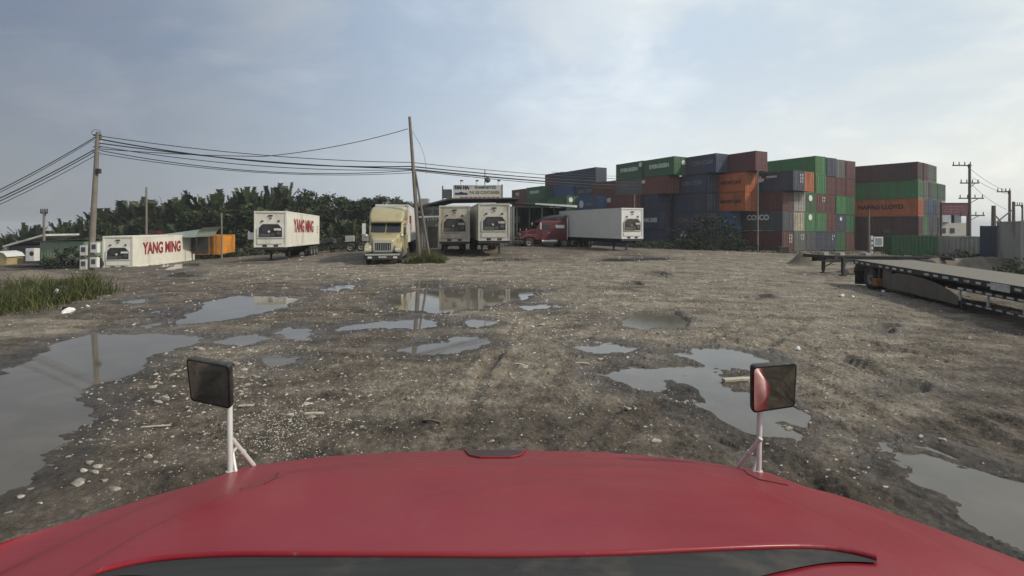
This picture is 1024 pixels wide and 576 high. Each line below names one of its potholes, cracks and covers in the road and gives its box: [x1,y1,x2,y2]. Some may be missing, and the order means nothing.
pothole [609,310,698,330]
